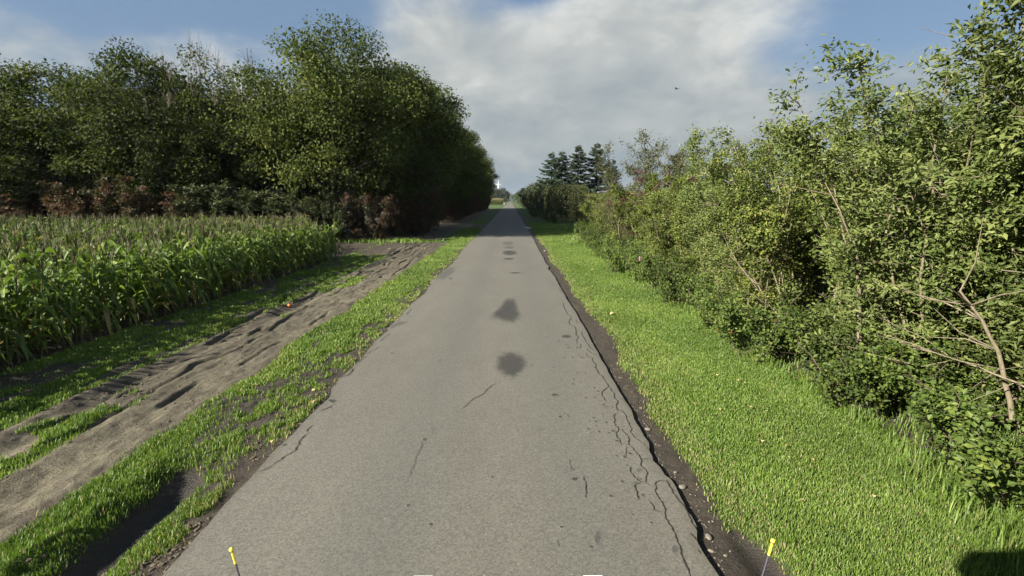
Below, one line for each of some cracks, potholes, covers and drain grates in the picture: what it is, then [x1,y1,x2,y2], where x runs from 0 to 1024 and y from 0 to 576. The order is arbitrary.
crack [563,304,700,574]
crack [261,405,332,471]
